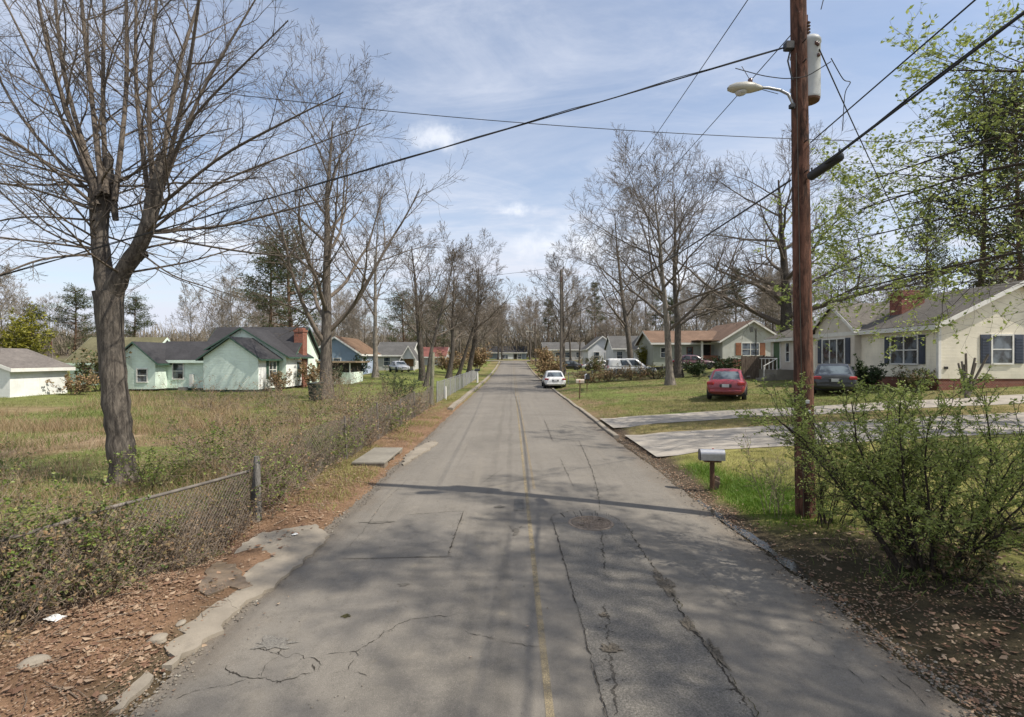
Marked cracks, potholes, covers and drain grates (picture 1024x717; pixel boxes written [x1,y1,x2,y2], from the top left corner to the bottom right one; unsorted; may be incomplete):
manhole cover [568,516,614,531]
crack [180,614,525,697]
crack [550,509,607,715]
crack [615,517,768,717]
